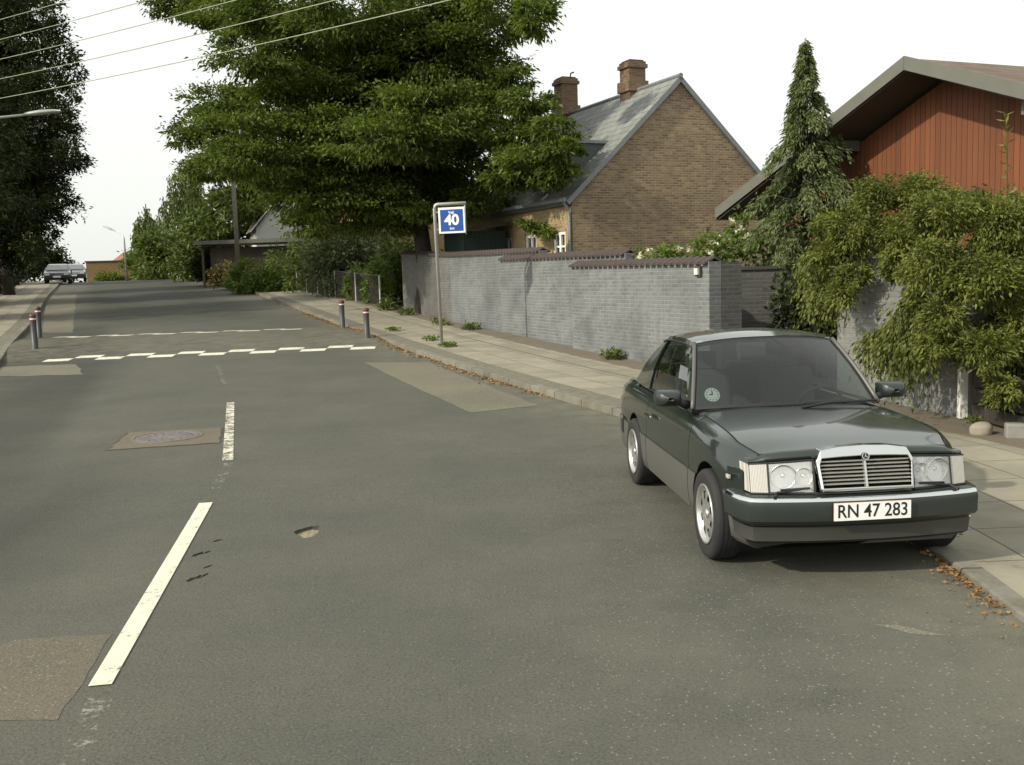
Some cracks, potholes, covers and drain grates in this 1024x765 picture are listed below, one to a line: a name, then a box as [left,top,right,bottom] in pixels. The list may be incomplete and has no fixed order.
crack [187,539,223,582]
manhole cover [130,430,203,443]
pothole [294,526,323,538]
